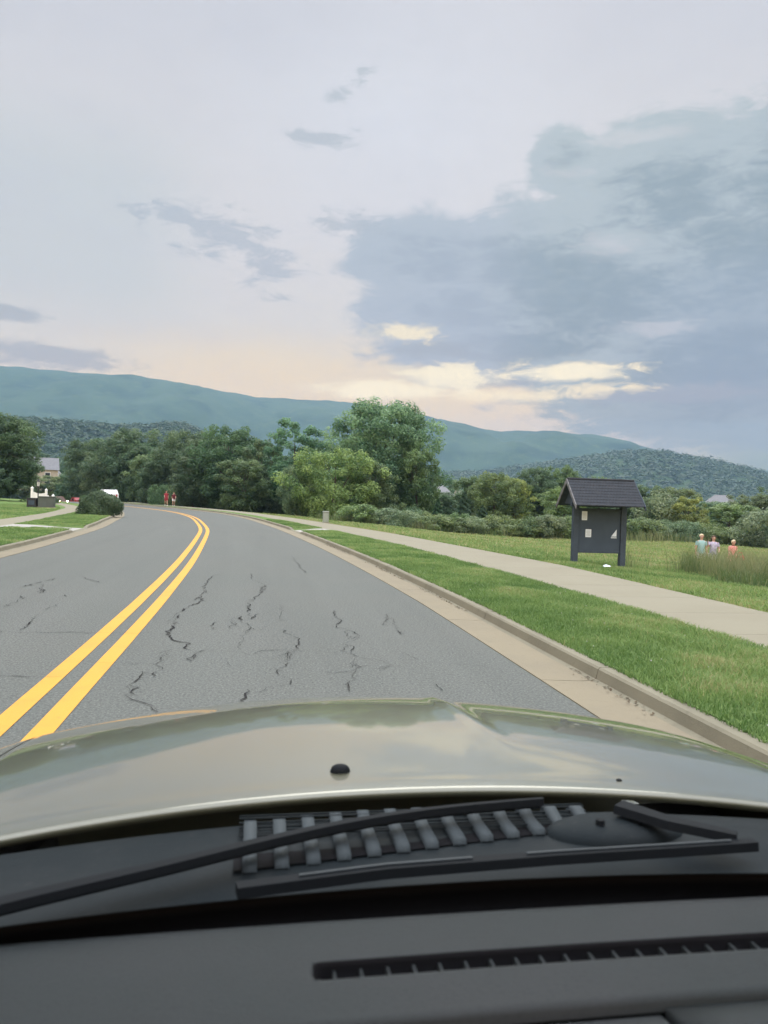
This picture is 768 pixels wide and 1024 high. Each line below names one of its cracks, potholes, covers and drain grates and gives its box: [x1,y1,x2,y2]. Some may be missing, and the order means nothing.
crack [0,578,143,634]
crack [79,576,212,712]
crack [210,573,300,702]
crack [318,611,362,691]
